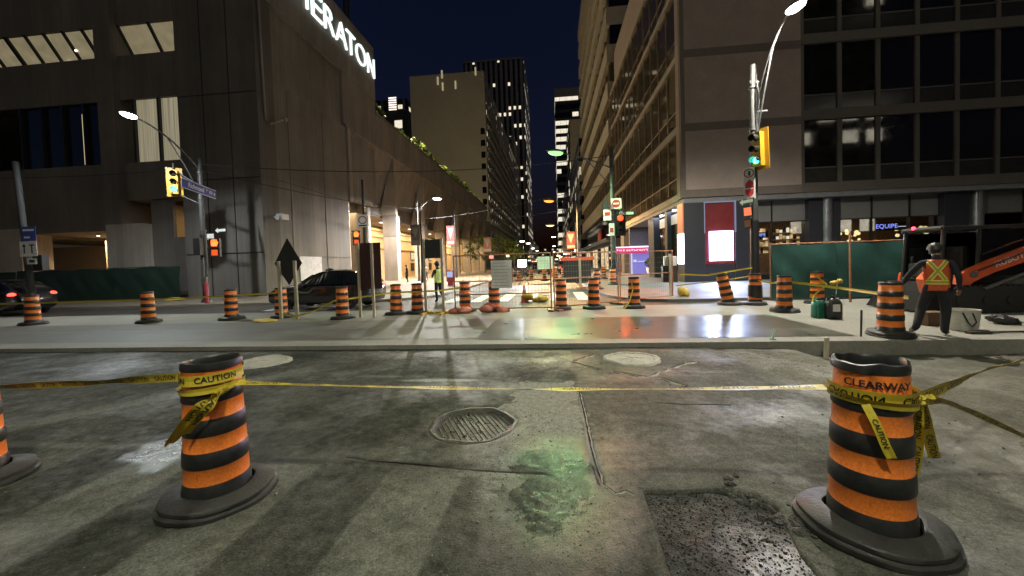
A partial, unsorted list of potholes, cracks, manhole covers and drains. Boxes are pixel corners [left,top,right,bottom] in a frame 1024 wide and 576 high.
crack [572,355,731,496]
manhole cover [603,352,661,367]
manhole cover [243,354,293,370]
pothole [638,486,827,576]
